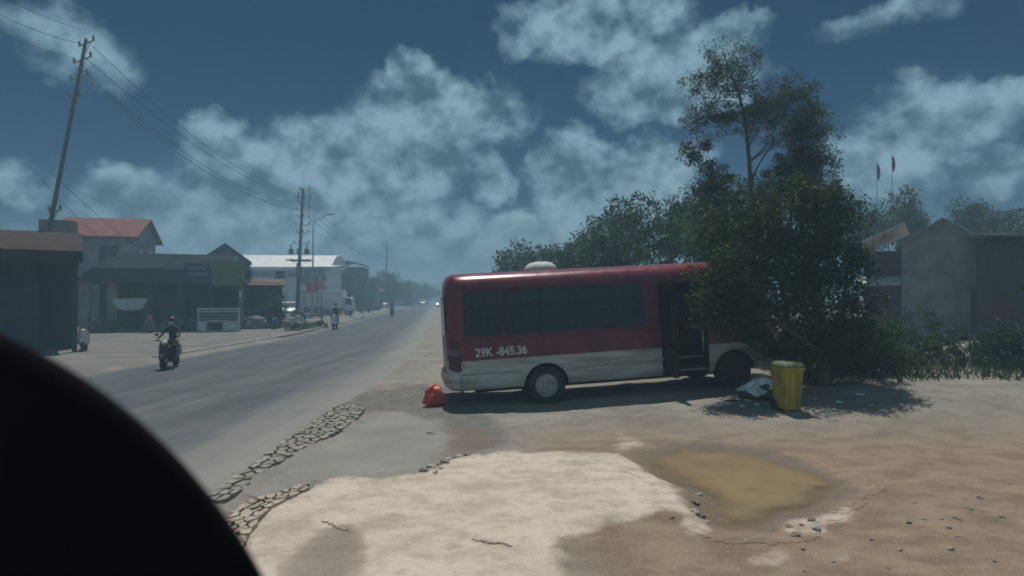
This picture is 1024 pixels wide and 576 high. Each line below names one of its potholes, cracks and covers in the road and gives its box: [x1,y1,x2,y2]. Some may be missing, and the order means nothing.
pothole [612,438,887,546]
crack [209,402,365,545]
